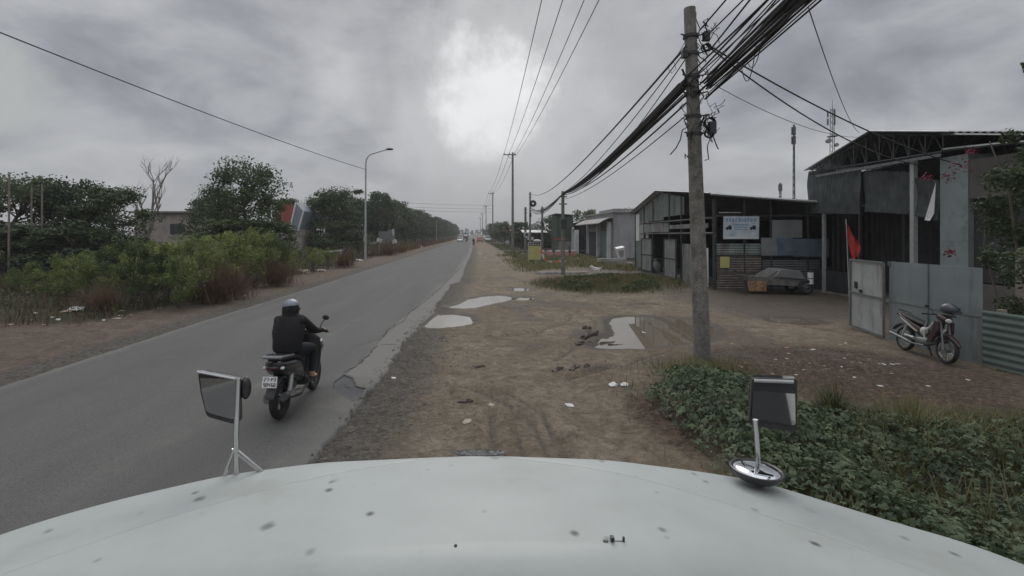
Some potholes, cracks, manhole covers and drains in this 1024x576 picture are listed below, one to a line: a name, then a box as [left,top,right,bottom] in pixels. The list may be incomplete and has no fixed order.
pothole [330,373,368,401]
